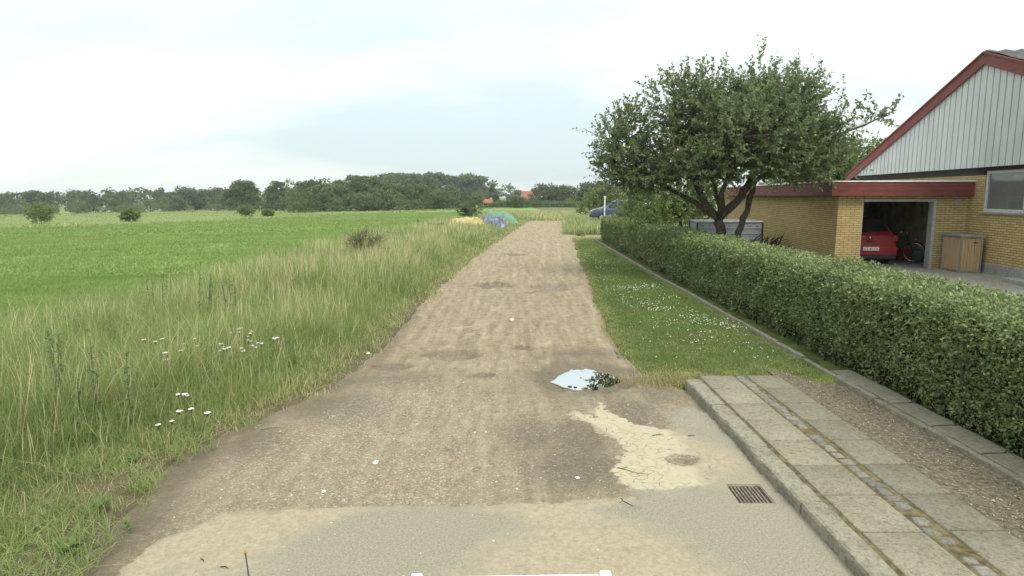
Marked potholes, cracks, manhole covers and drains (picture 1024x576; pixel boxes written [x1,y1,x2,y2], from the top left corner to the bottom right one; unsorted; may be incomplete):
crack [589,404,710,490]
drain grate [726,484,775,504]
pothole [527,358,645,395]
